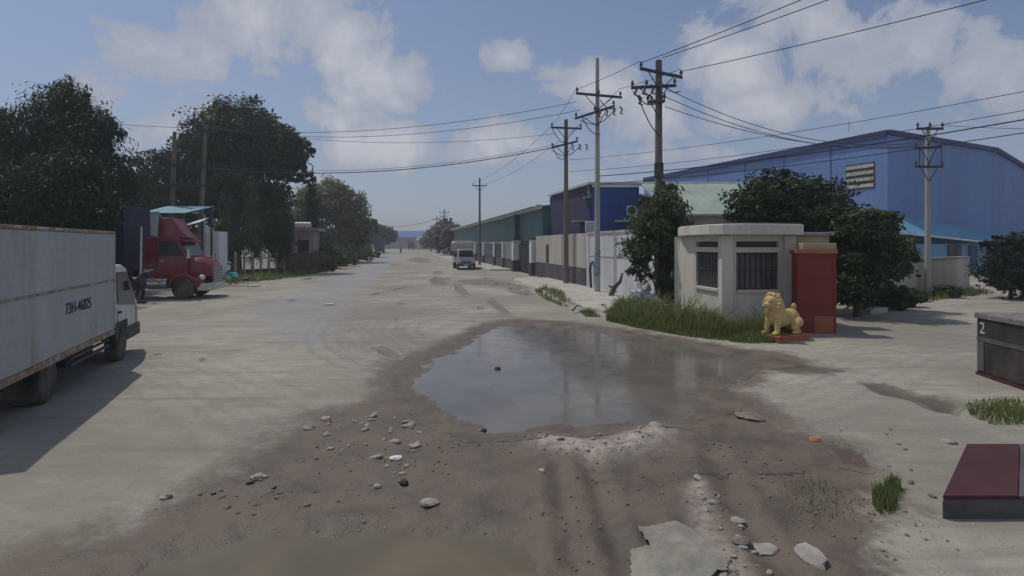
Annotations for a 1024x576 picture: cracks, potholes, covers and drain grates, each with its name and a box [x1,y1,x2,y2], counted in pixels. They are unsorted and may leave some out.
pothole [862,382,965,415]
pothole [366,344,407,361]
pothole [445,278,534,291]
pothole [451,281,473,298]
pothole [384,320,799,443]
pothole [503,286,539,297]
pothole [426,275,455,287]
